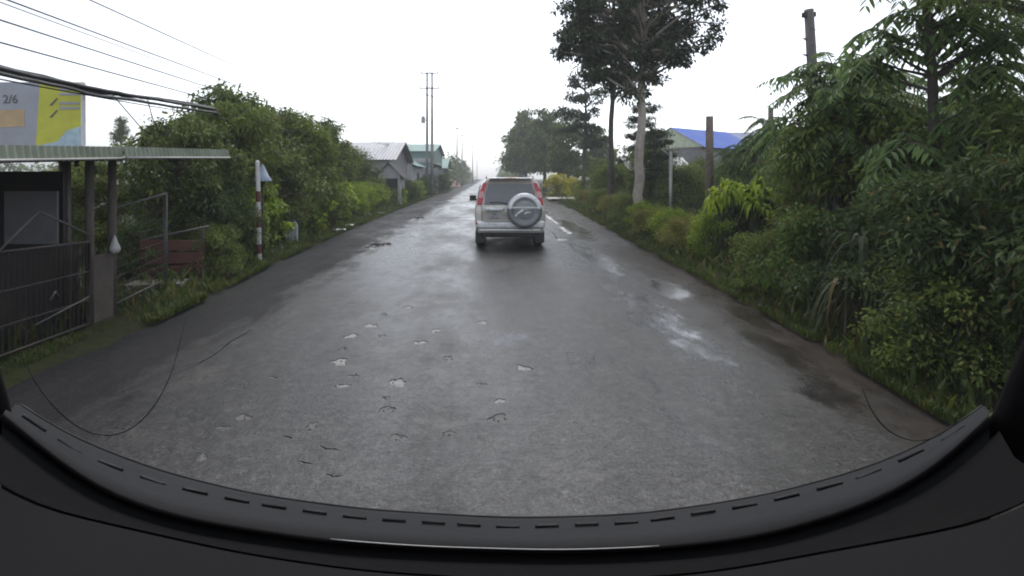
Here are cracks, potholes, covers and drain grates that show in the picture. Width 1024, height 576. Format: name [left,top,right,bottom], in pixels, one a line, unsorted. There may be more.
pothole [487,413,506,422]
pothole [365,242,392,250]
pothole [389,376,407,387]
pothole [389,434,408,442]
